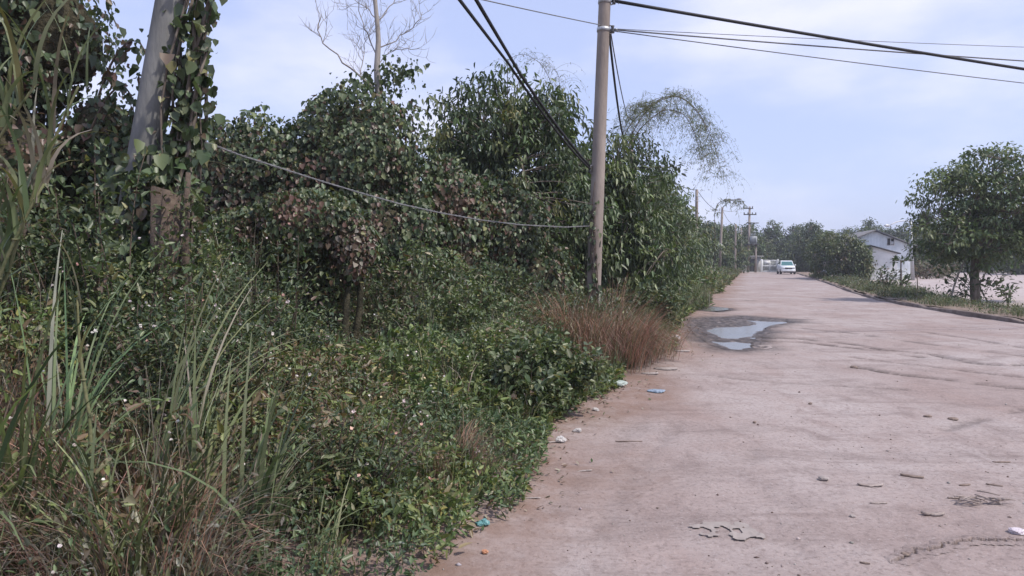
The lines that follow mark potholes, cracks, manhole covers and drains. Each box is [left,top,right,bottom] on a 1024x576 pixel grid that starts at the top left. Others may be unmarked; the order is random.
crack [885,535,1024,565]
pothole [687,316,795,351]
